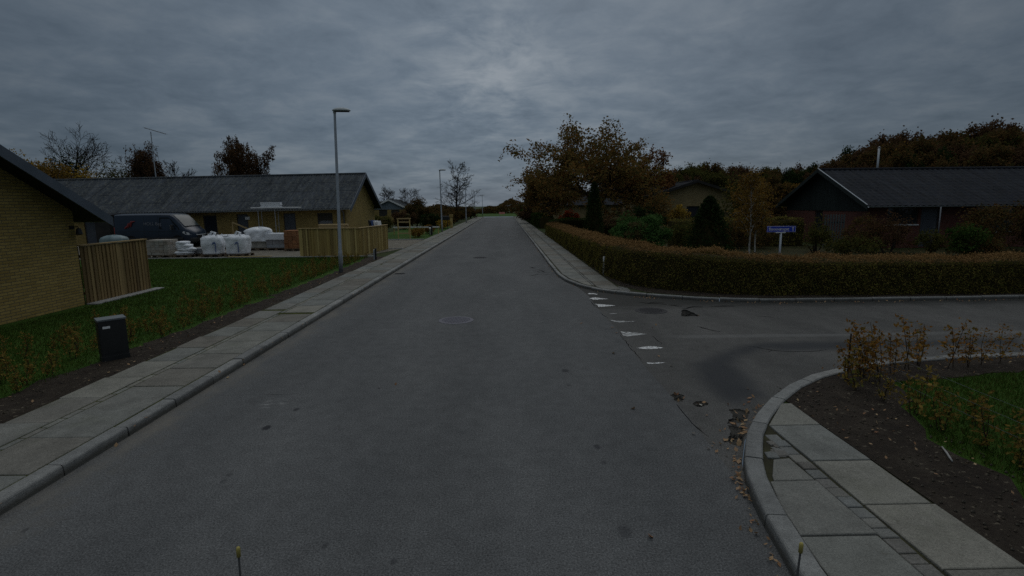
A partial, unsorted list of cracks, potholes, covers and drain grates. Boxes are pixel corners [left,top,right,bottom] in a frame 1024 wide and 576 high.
manhole cover [439,316,474,324]
pothole [728,425,745,447]
pothole [727,409,750,424]
